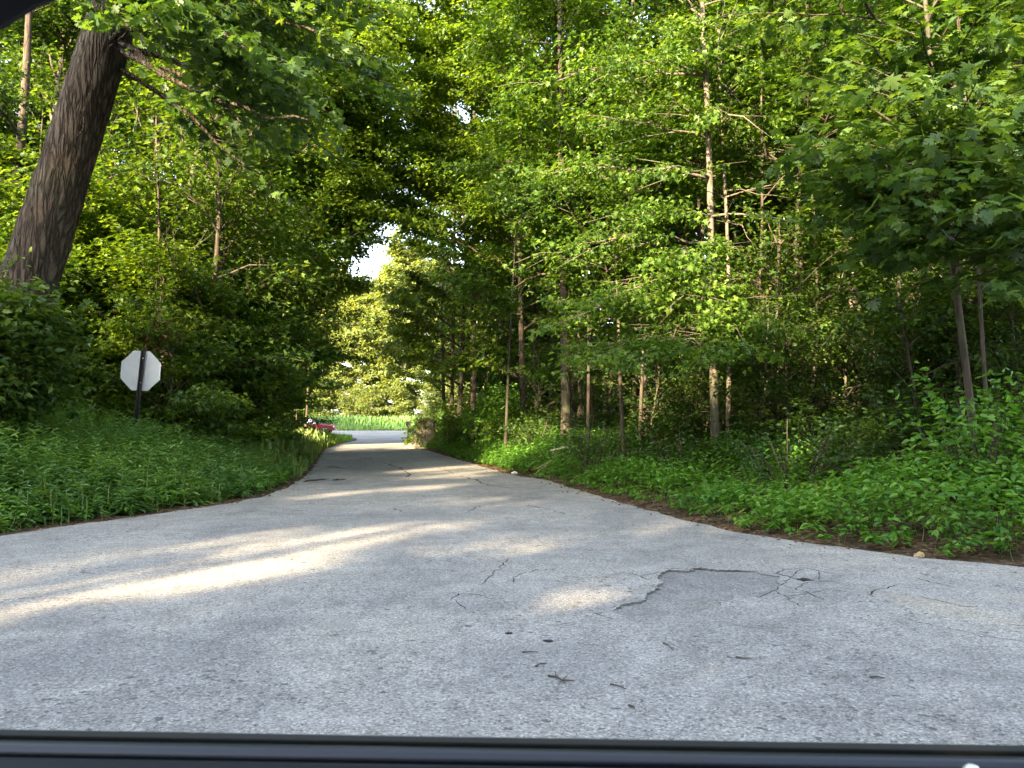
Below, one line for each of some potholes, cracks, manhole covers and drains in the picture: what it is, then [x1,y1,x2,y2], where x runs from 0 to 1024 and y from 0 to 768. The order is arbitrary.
crack [759,568,846,606]
crack [450,557,534,609]
